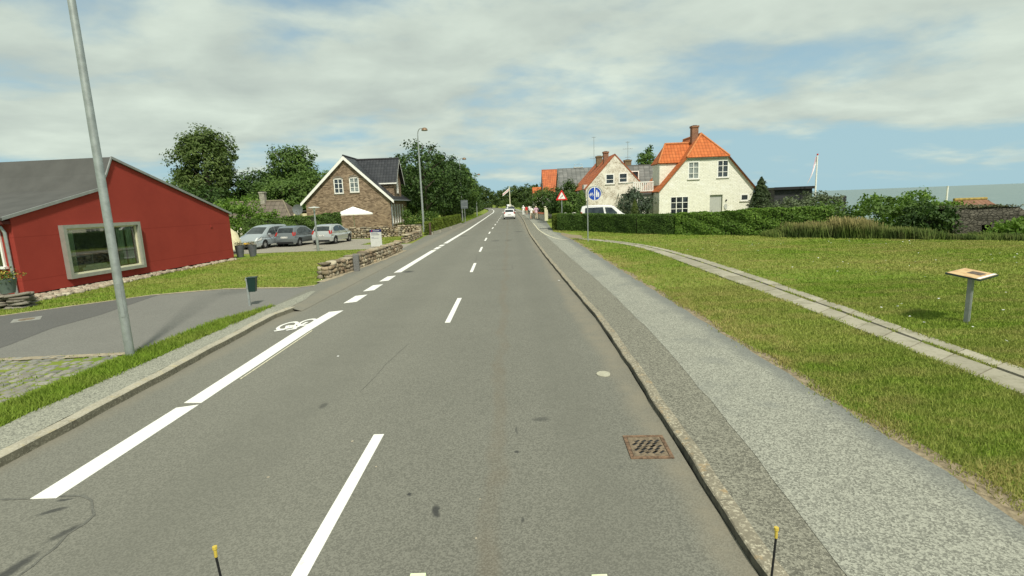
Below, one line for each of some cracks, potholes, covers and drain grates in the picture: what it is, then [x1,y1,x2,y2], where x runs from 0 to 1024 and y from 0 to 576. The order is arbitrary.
drain grate [623,435,674,459]
